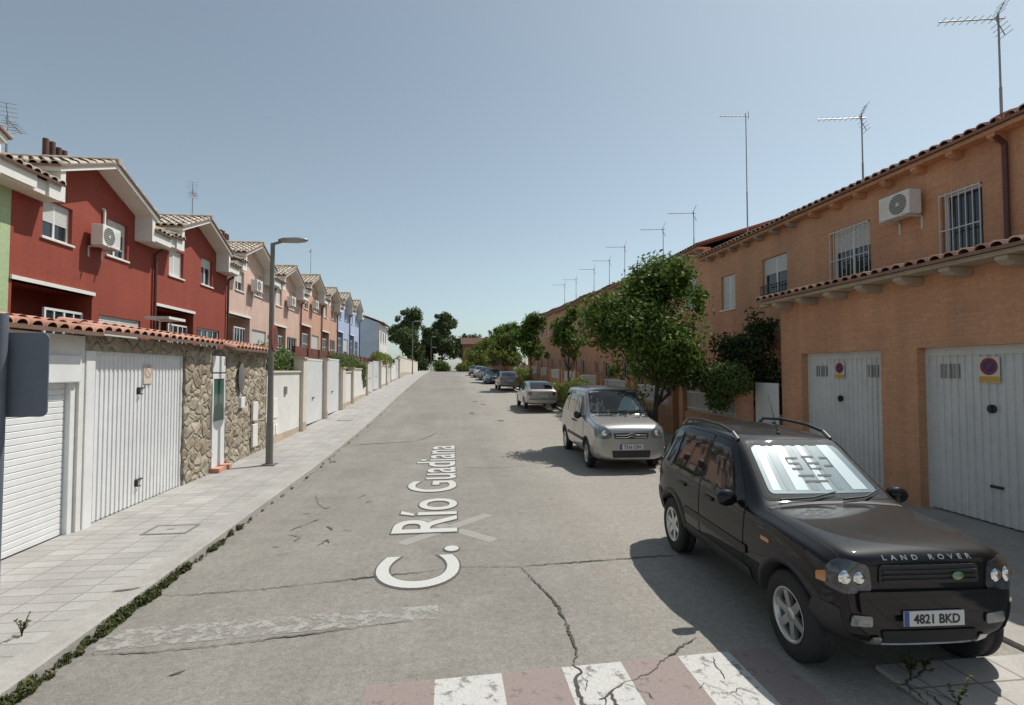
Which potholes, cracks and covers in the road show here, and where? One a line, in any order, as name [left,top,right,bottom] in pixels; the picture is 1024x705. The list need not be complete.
crack [161,551,714,705]
manhole cover [140,524,201,535]
crack [891,668,961,705]
